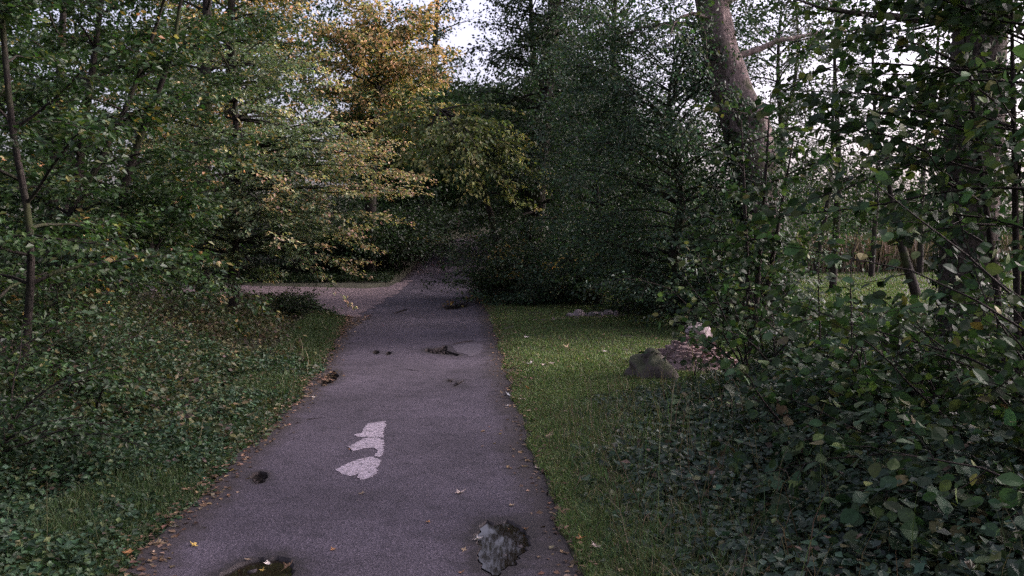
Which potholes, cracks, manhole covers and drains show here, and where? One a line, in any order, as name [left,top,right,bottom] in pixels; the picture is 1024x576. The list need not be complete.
pothole [425,346,460,356]
pothole [250,471,268,484]
pothole [473,519,531,576]
pothole [219,555,296,576]
pothole [319,370,339,386]
